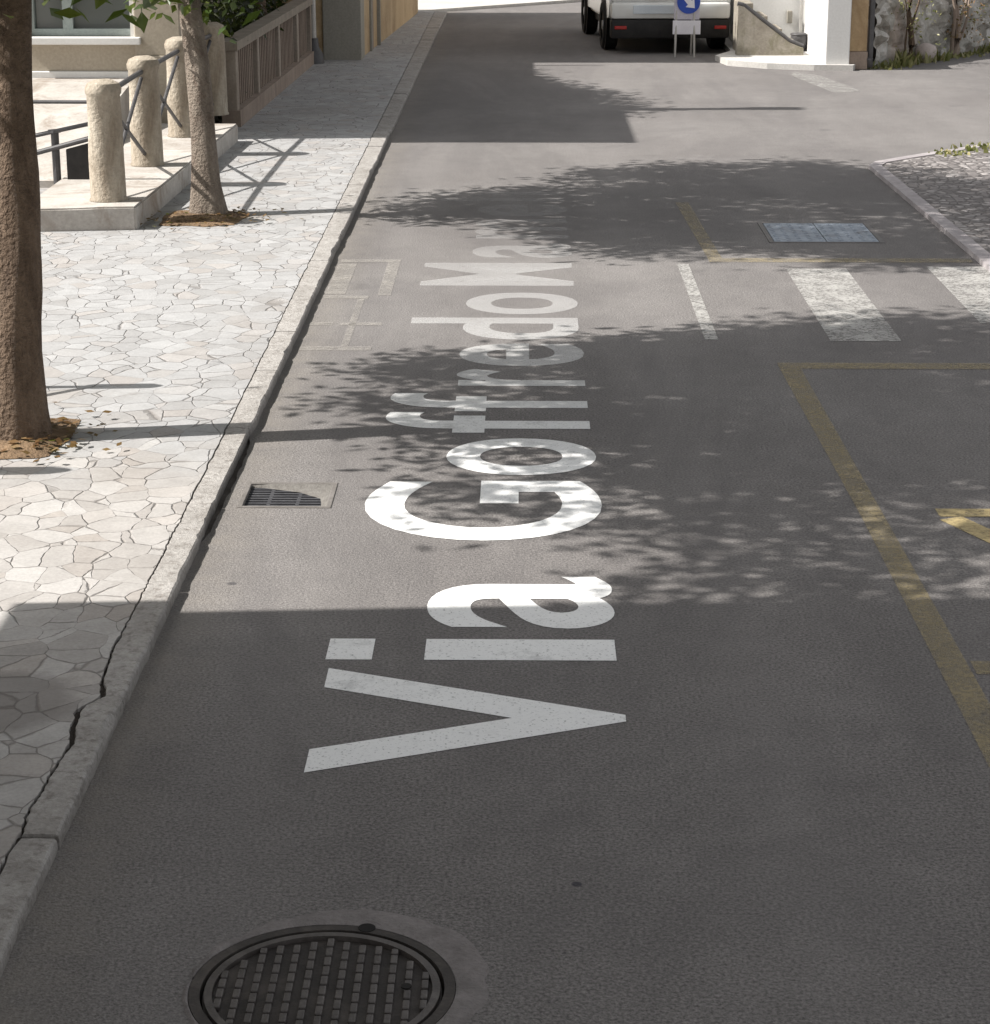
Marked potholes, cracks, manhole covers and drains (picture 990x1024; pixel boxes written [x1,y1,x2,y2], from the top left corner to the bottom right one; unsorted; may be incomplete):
crack [5,543,169,863]
manhole cover [182,909,489,1024]
manhole cover [757,222,885,243]
